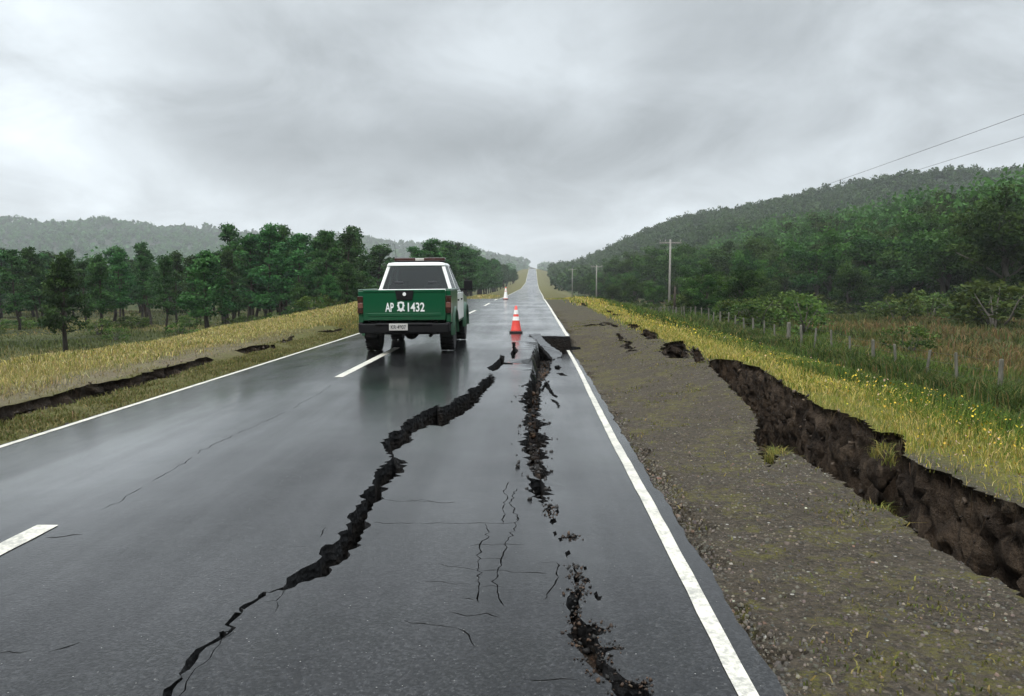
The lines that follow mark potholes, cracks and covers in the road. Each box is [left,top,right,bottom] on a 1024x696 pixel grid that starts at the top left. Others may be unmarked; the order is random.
crack [103,336,651,696]
